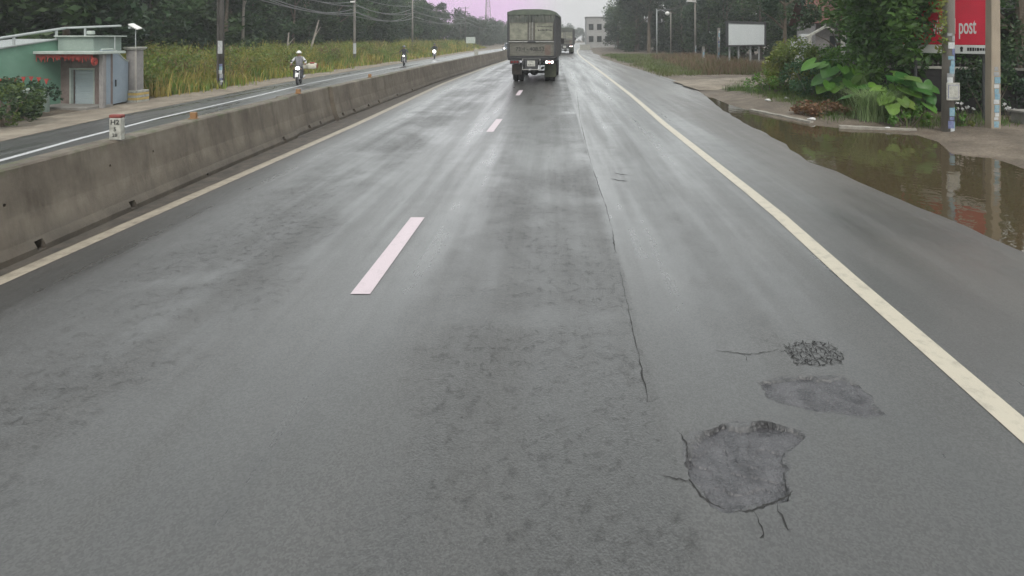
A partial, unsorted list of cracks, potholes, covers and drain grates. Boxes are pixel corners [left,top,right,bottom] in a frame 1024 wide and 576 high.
pothole [666,420,806,538]
crack [717,340,844,366]
crack [577,97,648,397]
